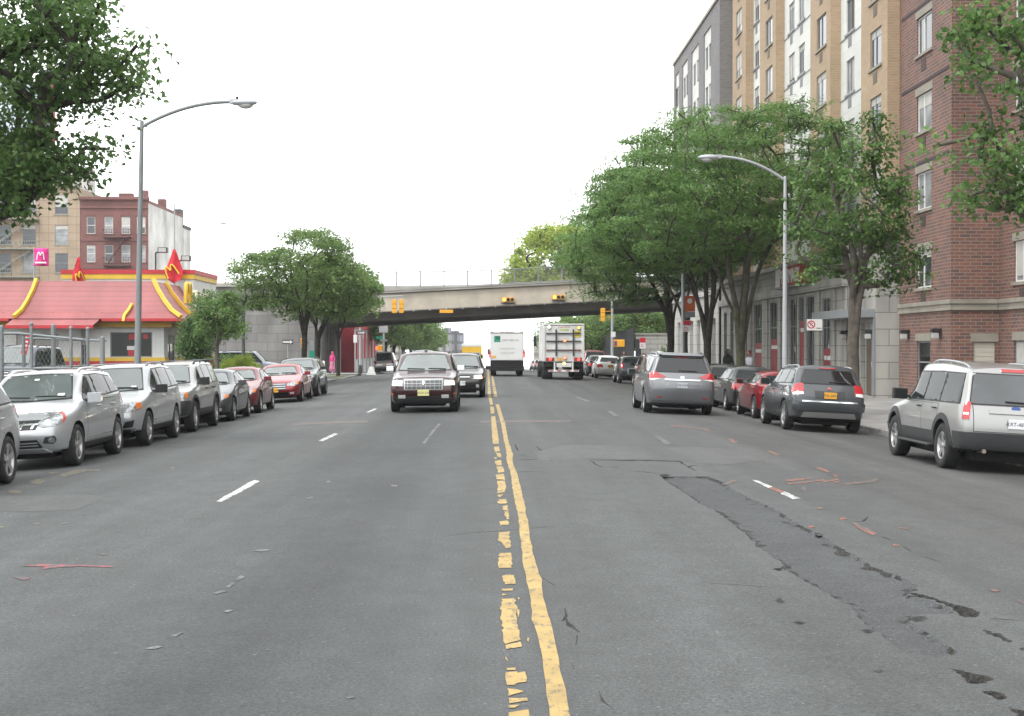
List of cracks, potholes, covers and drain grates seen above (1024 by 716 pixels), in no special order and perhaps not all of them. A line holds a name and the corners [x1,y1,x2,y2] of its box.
pothole [950,668,994,684]
crack [561,608,581,646]
crack [589,460,697,474]
